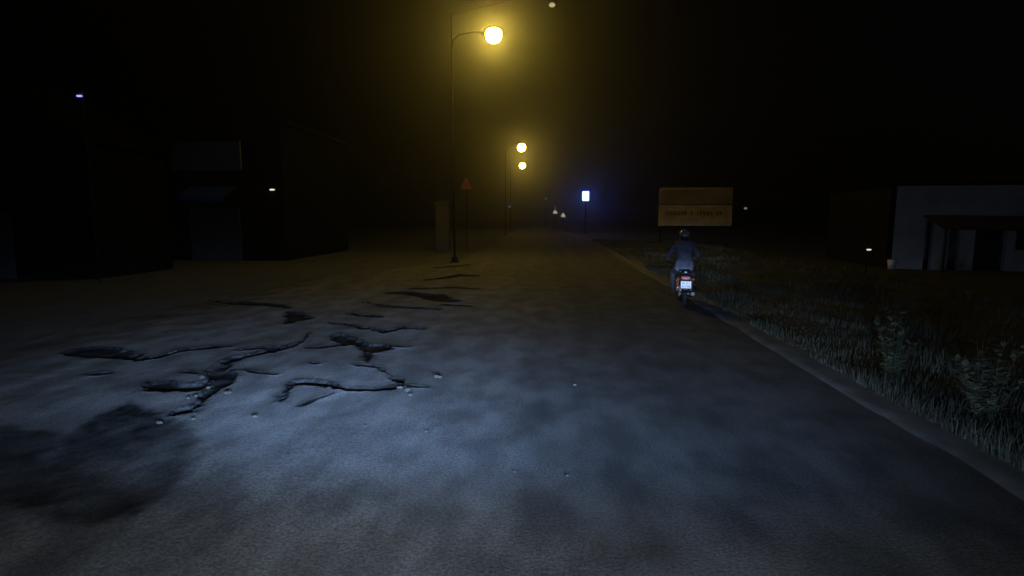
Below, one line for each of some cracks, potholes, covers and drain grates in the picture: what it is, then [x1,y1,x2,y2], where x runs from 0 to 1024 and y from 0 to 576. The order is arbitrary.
pothole [51,345,158,364]
crack [71,264,485,412]
pothole [272,311,319,327]
pothole [321,331,400,364]
pothole [167,346,285,417]
pothole [123,377,216,397]
pothole [377,291,469,304]
